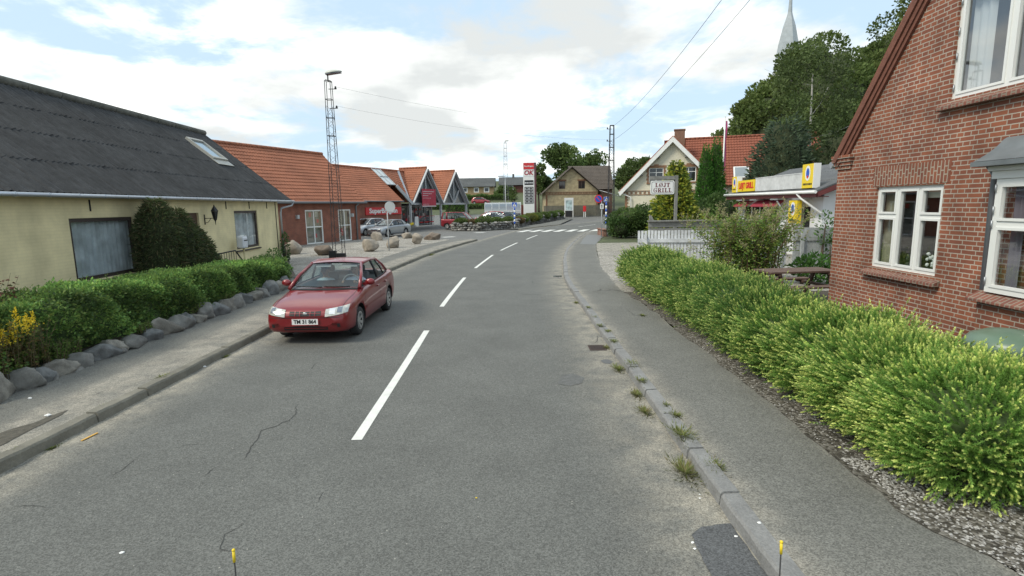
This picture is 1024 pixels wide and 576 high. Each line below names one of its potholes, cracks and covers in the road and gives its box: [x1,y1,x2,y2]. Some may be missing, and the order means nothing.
crack [245,407,297,458]
